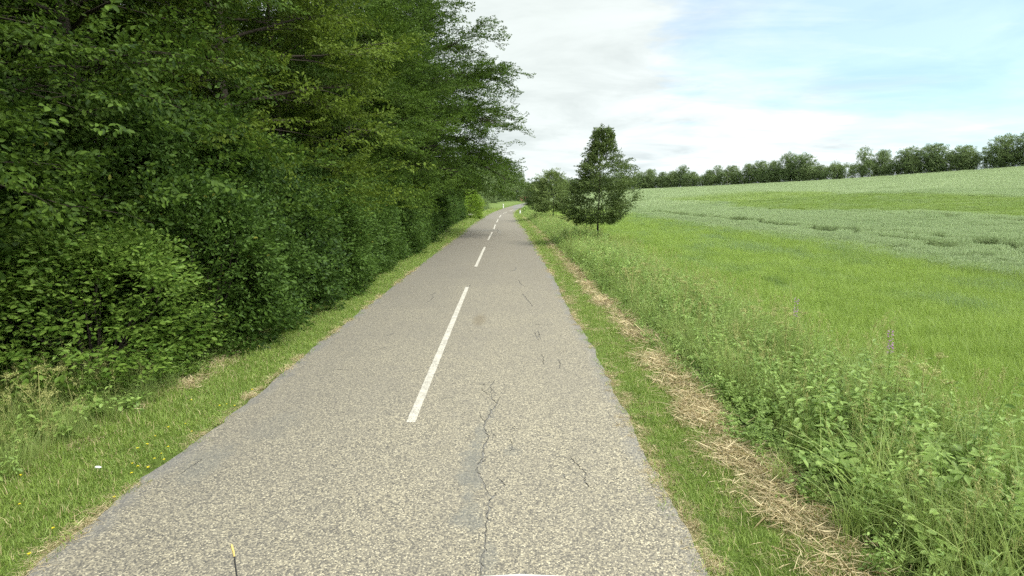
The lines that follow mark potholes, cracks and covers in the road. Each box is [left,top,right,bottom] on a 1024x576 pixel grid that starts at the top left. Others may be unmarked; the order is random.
crack [562,456,591,488]
crack [462,381,515,576]
